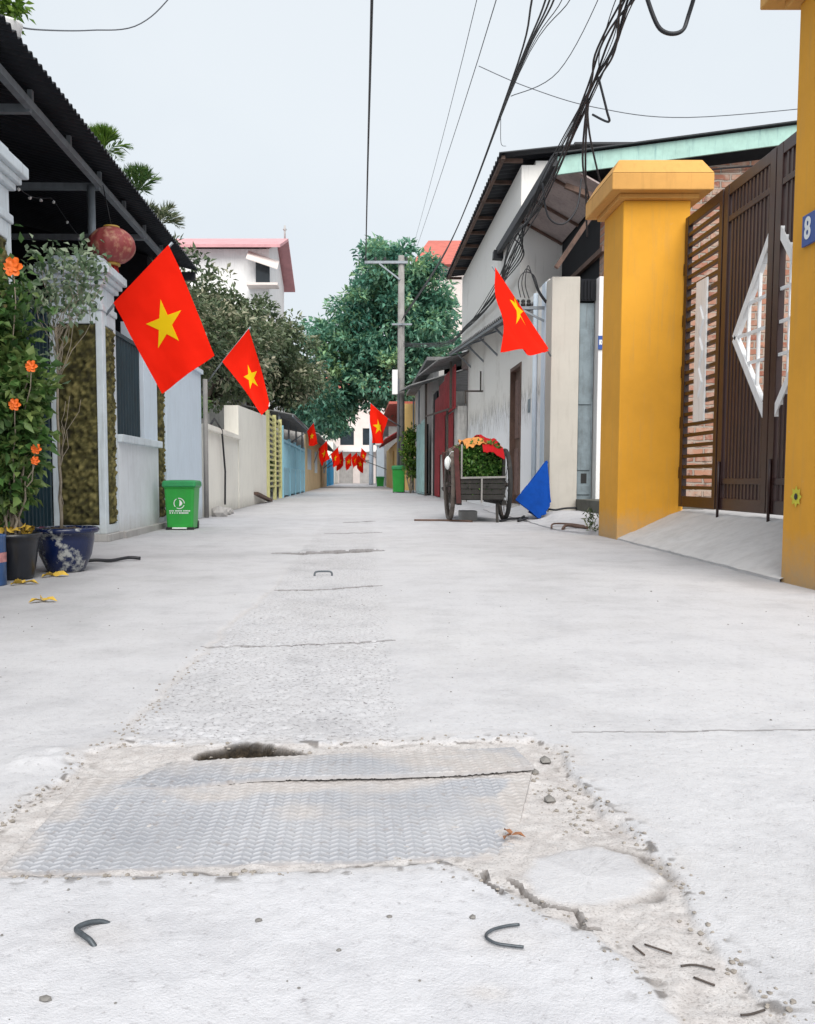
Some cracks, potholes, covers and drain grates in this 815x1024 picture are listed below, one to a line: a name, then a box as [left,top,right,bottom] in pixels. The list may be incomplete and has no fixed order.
crack [480,870,602,932]
manhole cover [112,747,534,790]
manhole cover [0,770,532,876]
pothole [189,741,310,761]
